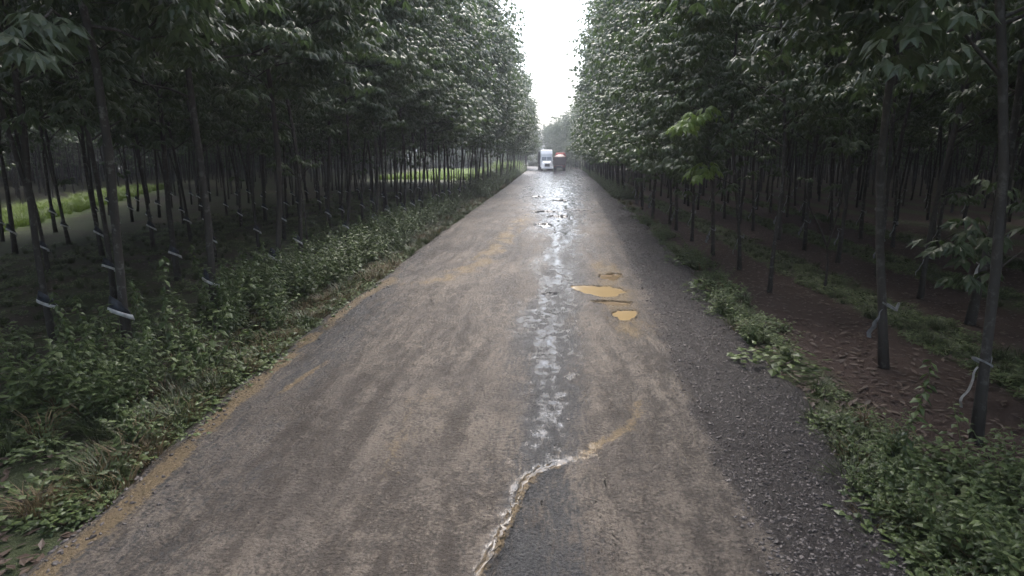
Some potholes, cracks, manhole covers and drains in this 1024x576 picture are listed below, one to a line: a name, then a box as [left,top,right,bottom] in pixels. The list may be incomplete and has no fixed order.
pothole [609,309,640,322]
pothole [566,284,632,298]
pothole [595,272,625,281]
